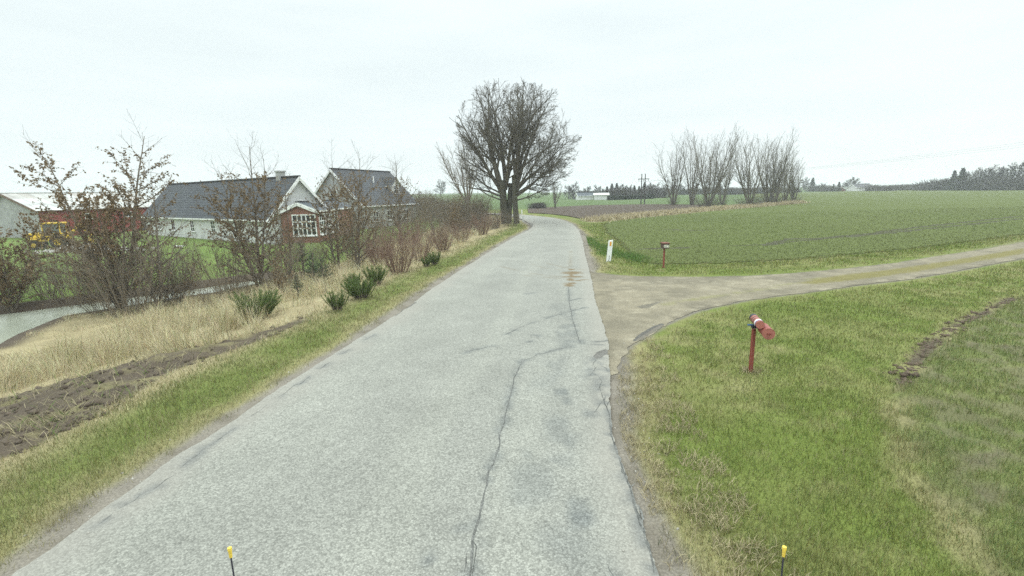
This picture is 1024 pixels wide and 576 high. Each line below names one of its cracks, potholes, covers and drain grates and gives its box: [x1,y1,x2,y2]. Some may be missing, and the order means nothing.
crack [456,322,567,576]
crack [590,340,656,576]
